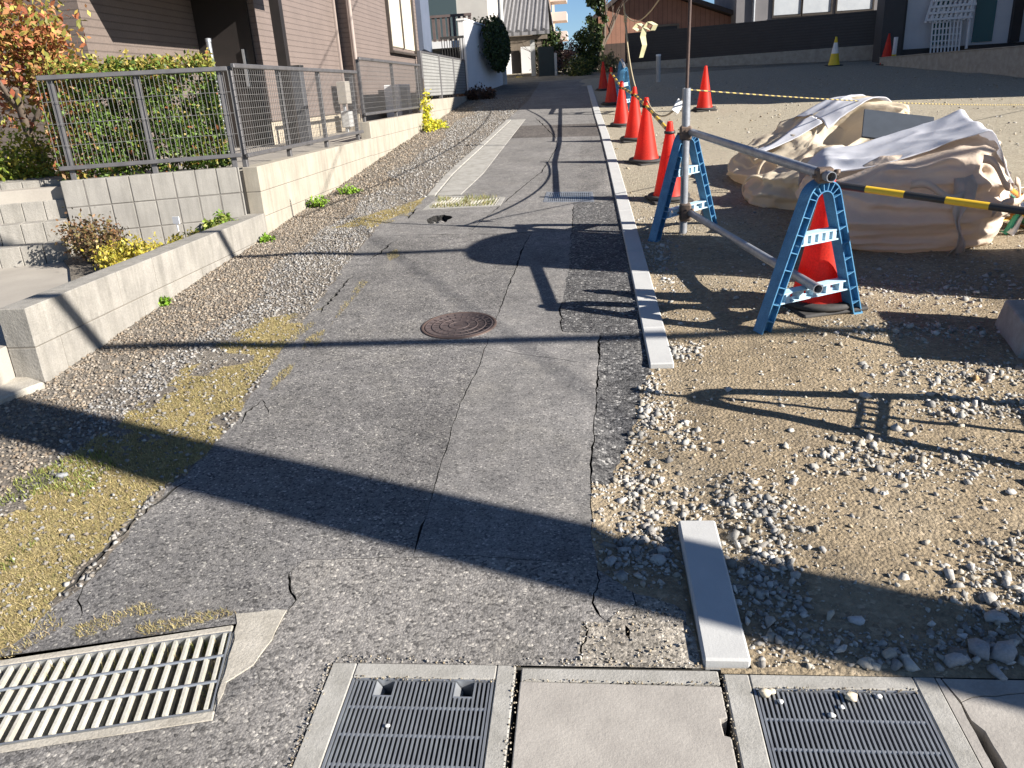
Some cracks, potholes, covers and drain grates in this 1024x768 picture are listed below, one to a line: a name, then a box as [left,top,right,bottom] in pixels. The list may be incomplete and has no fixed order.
drain grate [543,192,594,202]
pothole [427,215,453,224]
crack [237,401,269,427]
drain grate [0,631,232,746]
crack [52,478,192,620]
manhole cover [421,312,497,339]
crack [494,337,601,539]
drain grate [422,196,505,210]
